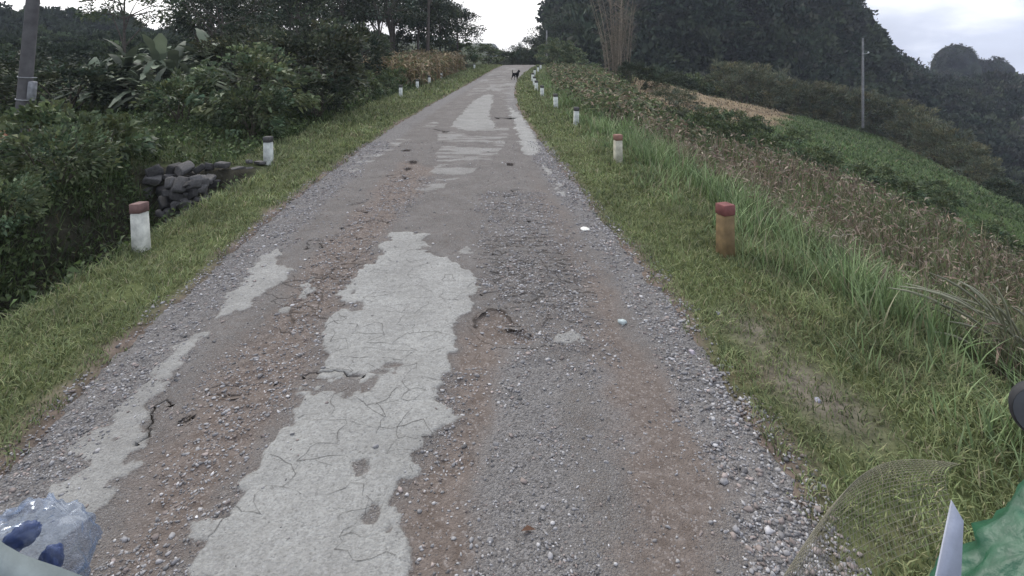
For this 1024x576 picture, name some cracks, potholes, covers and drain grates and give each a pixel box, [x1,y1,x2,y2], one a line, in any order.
pothole [467,305,544,349]
crack [134,378,280,446]
crack [209,188,594,576]
